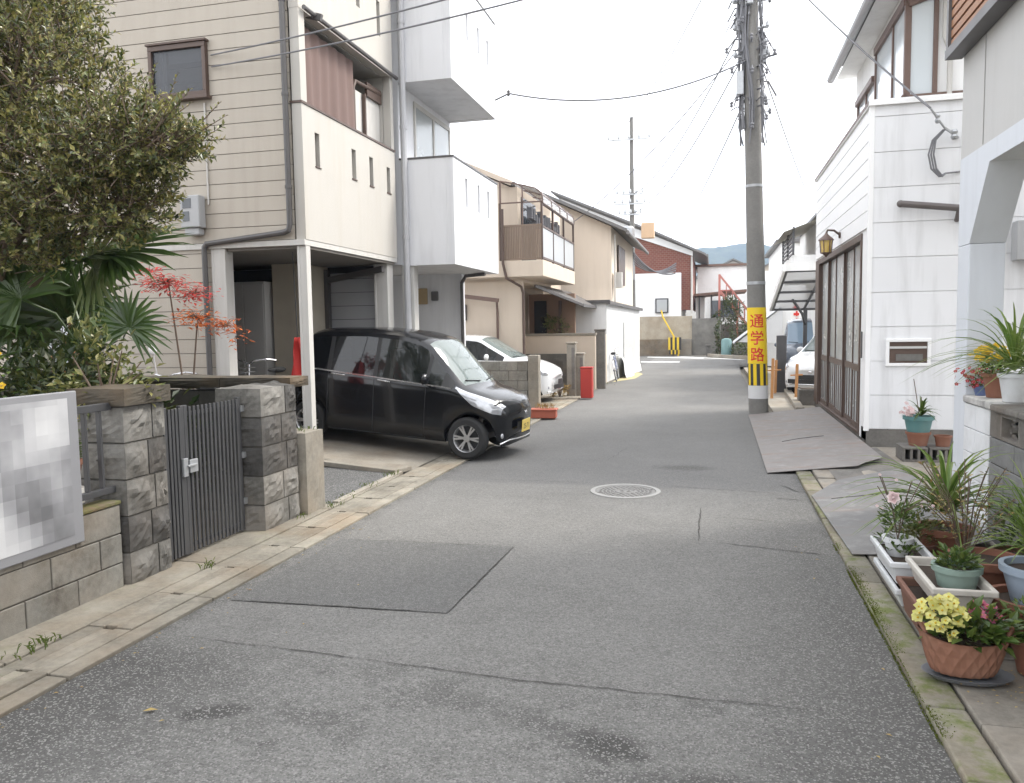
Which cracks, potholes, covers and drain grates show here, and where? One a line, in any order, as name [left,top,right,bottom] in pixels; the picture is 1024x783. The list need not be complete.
manhole cover [590,484,661,499]
